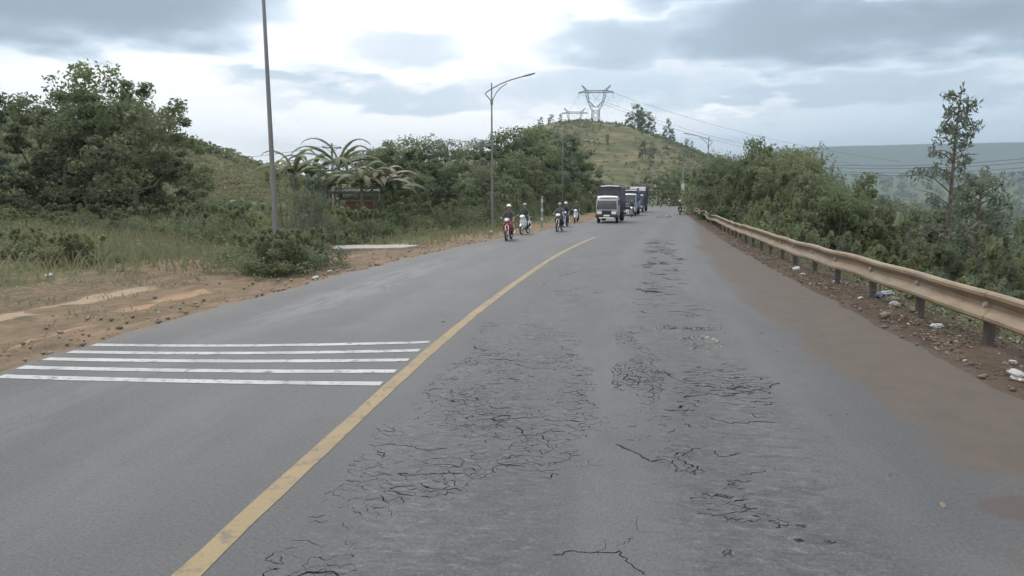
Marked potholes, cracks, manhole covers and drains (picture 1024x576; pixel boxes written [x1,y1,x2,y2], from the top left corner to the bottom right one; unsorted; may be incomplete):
crack [630,240,711,318]
crack [554,487,649,574]
pothole [676,335,724,352]
crack [602,325,789,528]
